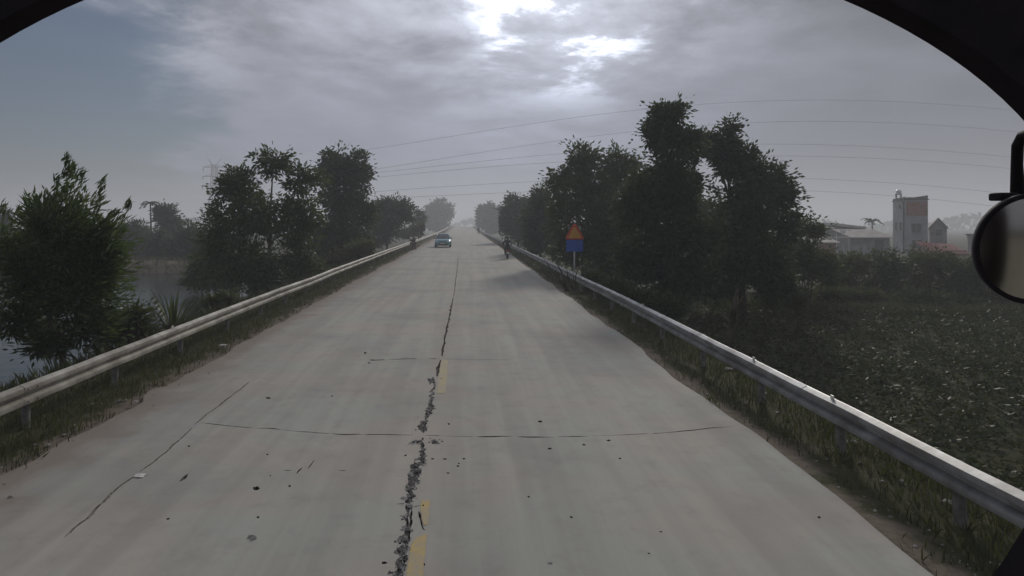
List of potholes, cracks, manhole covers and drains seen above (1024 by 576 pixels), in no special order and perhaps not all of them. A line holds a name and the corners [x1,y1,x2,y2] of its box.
crack [65,382,397,537]
crack [394,360,442,573]
